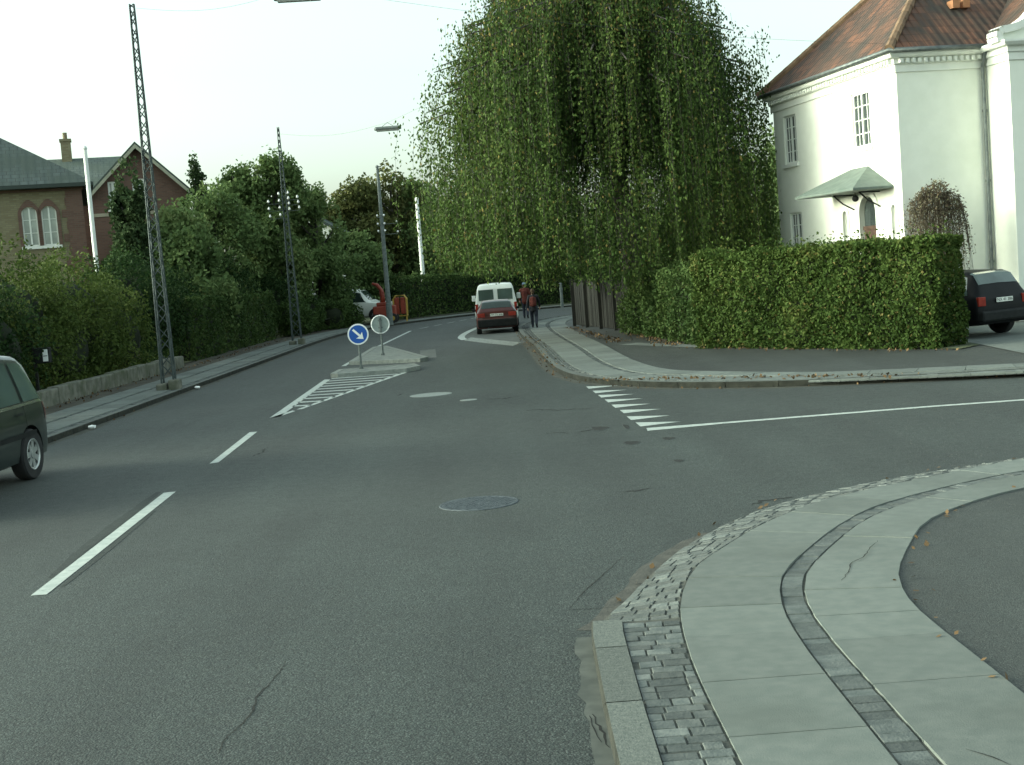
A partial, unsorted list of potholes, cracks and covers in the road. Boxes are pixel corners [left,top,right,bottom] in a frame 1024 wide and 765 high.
crack [589,714,610,748]
manhole cover [439,496,518,511]
crack [218,664,285,753]
